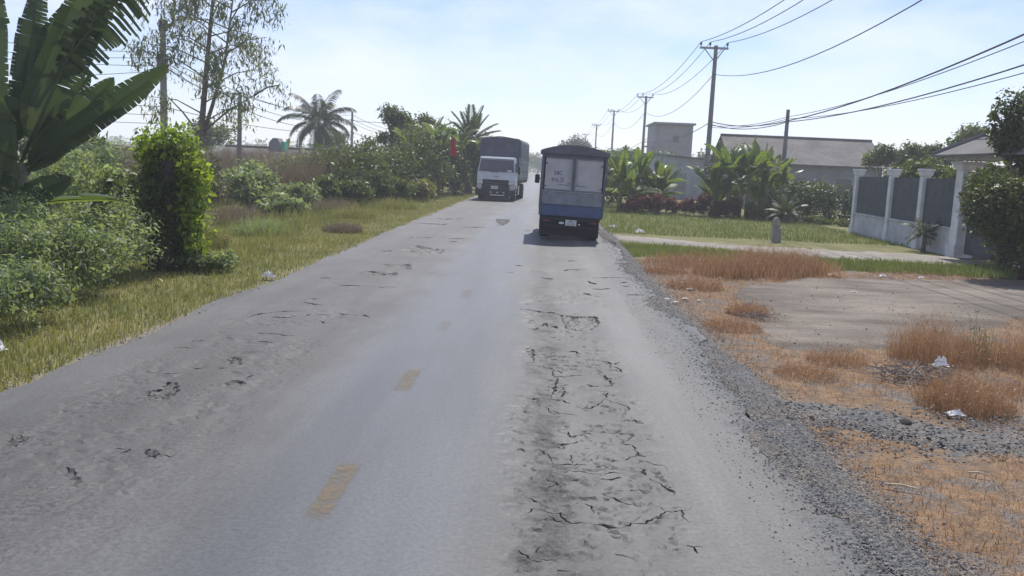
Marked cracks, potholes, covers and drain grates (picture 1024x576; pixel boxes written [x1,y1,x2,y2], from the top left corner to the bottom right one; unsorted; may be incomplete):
crack [518,547,566,572]
pothole [57,467,83,485]
pothole [139,448,160,460]
pothole [143,382,180,403]
pothole [6,434,30,448]
crack [527,348,691,529]
pothole [559,314,600,331]
pothole [226,356,242,365]
crack [150,298,369,378]
